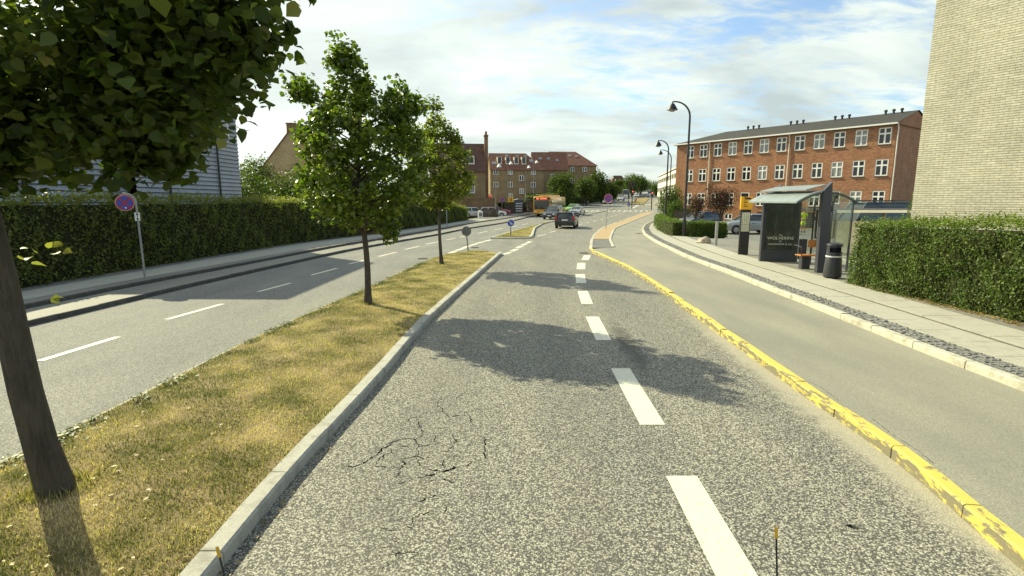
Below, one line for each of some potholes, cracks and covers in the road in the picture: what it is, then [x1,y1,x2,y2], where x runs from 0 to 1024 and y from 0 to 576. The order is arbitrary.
crack [343,391,487,569]
